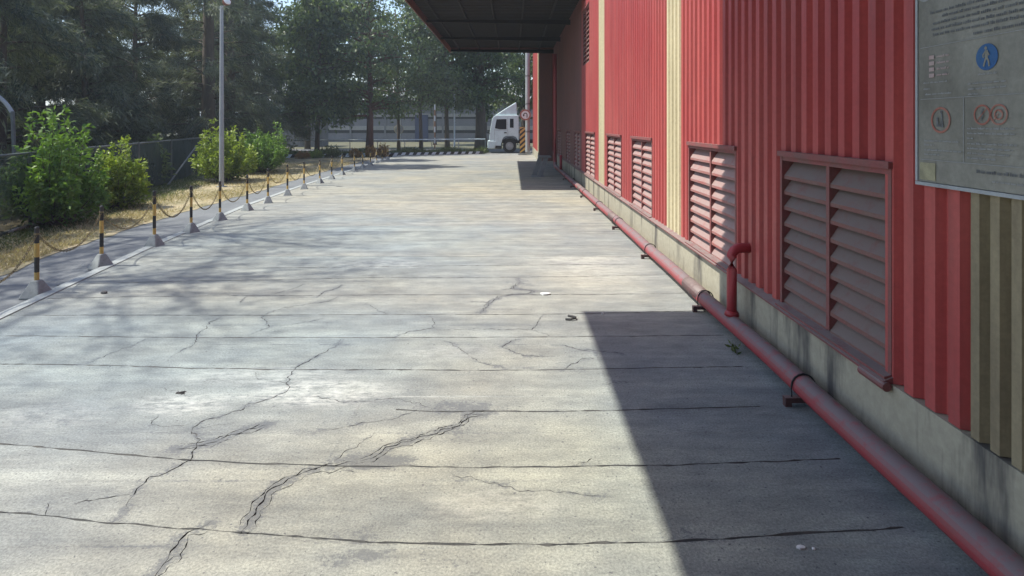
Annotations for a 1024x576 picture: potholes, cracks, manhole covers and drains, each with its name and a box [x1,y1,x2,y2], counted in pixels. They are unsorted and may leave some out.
crack [81,340,423,506]
crack [399,318,618,370]
crack [441,469,611,498]
crack [155,522,210,576]
crack [240,410,489,534]
